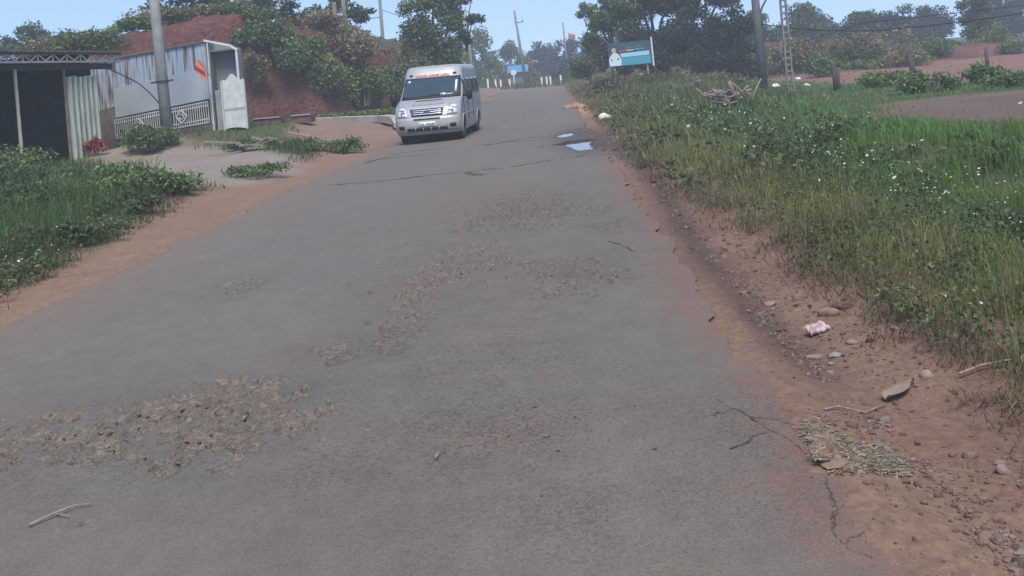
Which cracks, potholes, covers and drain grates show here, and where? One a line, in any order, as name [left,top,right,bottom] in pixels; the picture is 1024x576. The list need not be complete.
pothole [296,230,568,344]
pothole [399,187,656,248]
pothole [0,368,407,530]
pothole [212,278,269,295]
pothole [306,344,361,368]
crack [710,399,807,455]
crack [329,136,605,186]
crack [824,478,873,559]
pothole [467,244,669,319]
